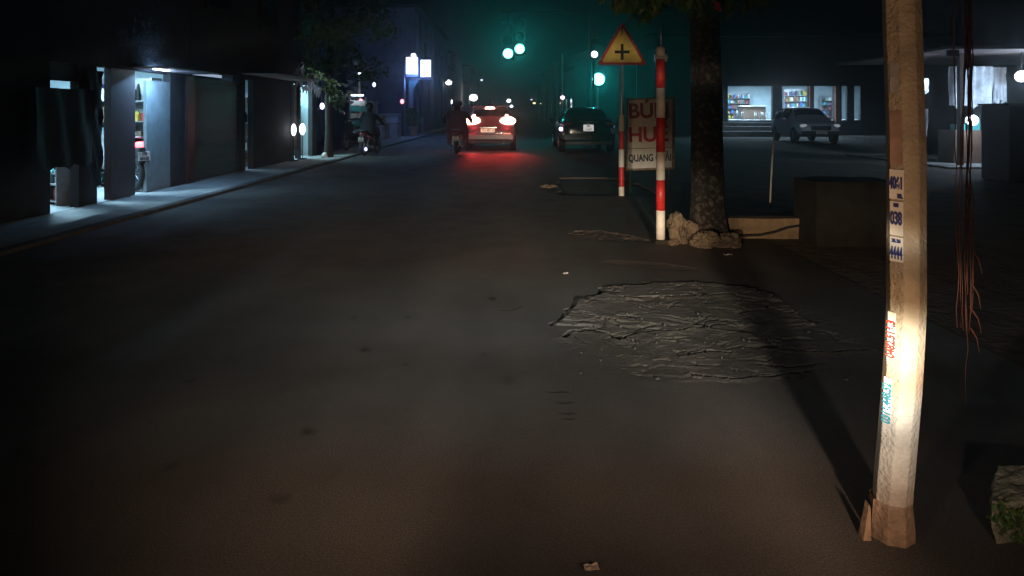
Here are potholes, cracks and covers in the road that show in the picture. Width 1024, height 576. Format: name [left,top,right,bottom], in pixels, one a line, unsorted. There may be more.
crack [547,260,883,420]
